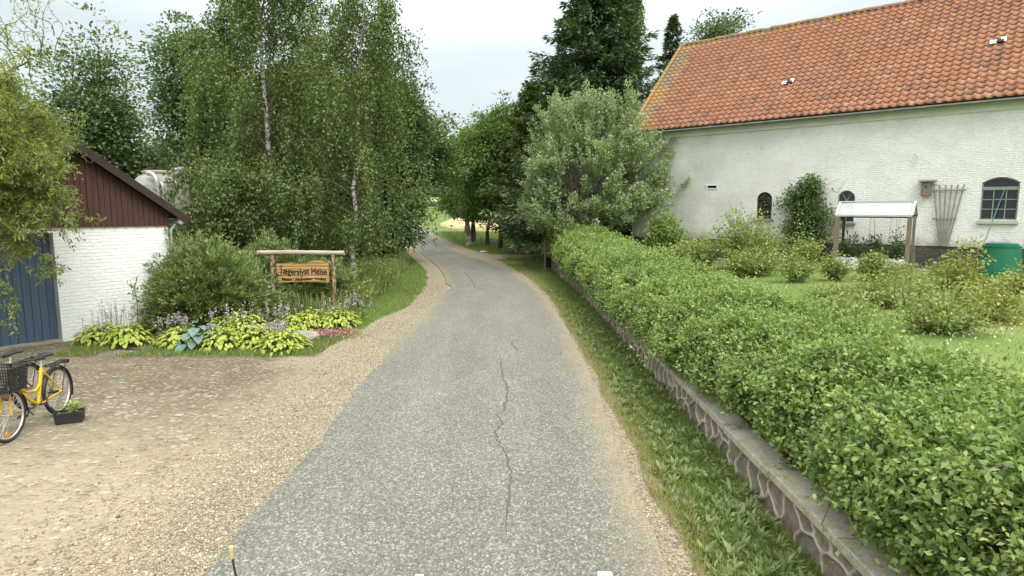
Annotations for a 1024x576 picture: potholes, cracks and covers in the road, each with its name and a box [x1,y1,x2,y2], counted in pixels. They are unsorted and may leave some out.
crack [493,341,518,536]
